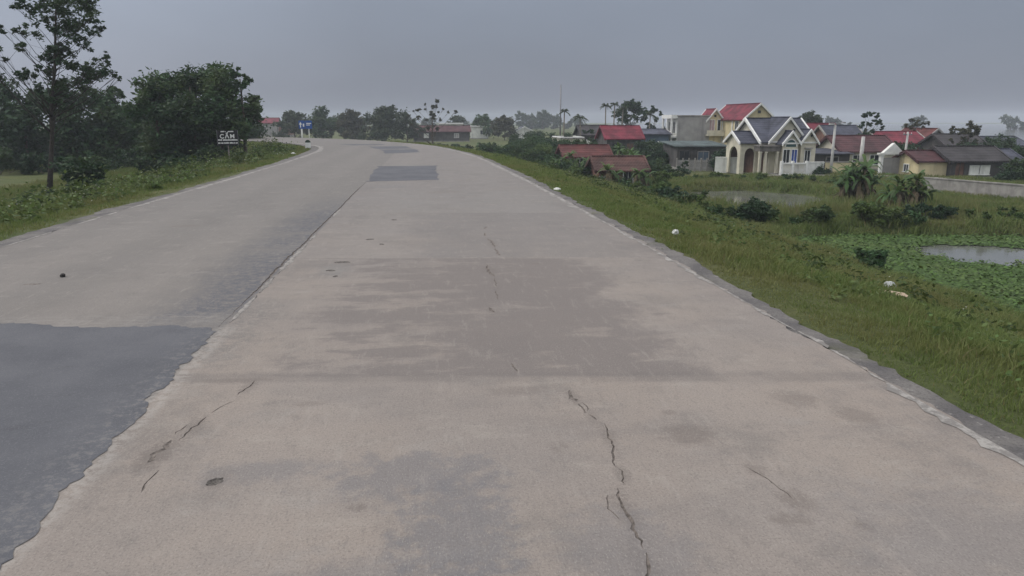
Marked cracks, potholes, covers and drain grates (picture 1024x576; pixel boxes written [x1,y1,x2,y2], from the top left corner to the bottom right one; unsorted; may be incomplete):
crack [141,380,255,492]
crack [748,467,792,498]
crack [568,390,651,576]
crack [484,227,518,371]
